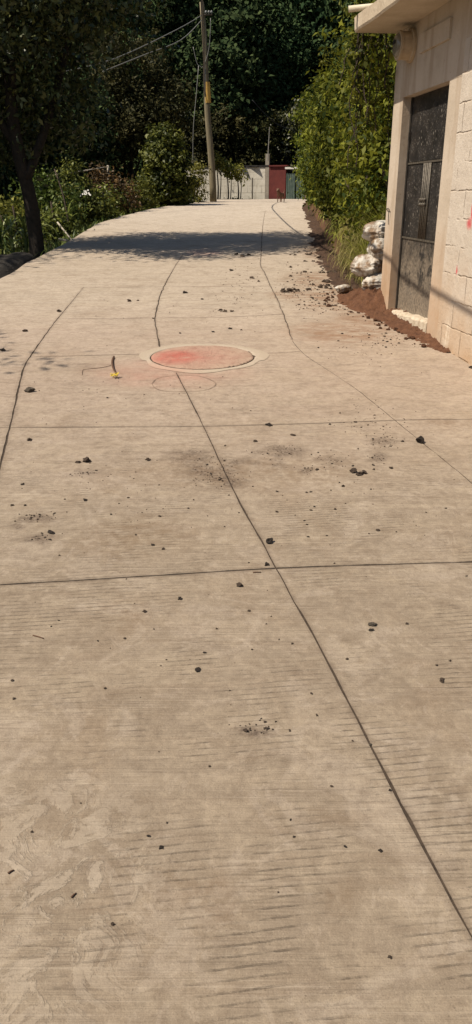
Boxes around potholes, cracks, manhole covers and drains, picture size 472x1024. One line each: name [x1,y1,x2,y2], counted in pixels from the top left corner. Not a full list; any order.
manhole cover [139,344,269,373]
